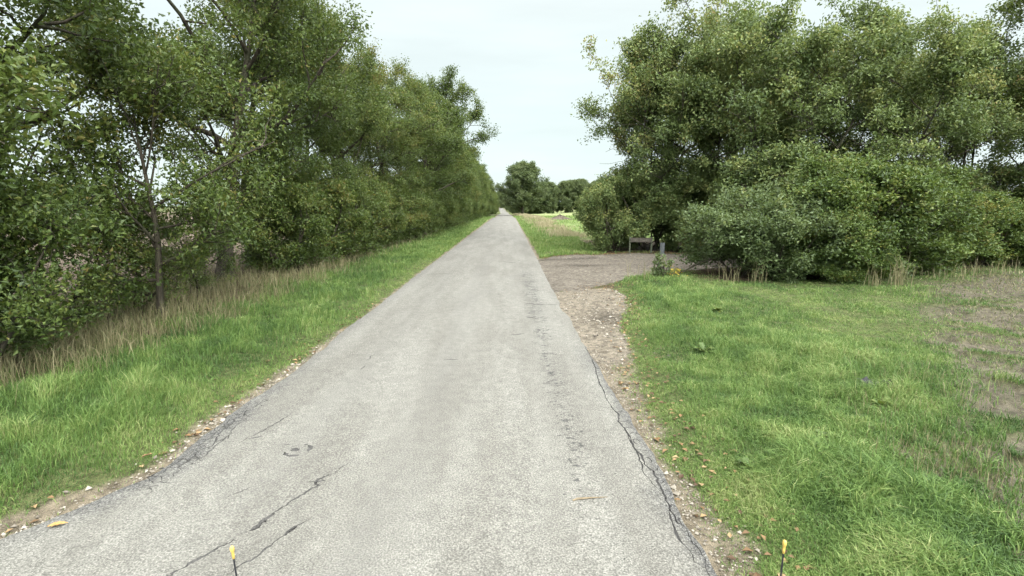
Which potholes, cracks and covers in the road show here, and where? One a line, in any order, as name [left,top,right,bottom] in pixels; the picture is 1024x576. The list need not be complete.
crack [166,463,348,576]
crack [146,396,288,494]
crack [585,347,710,576]
